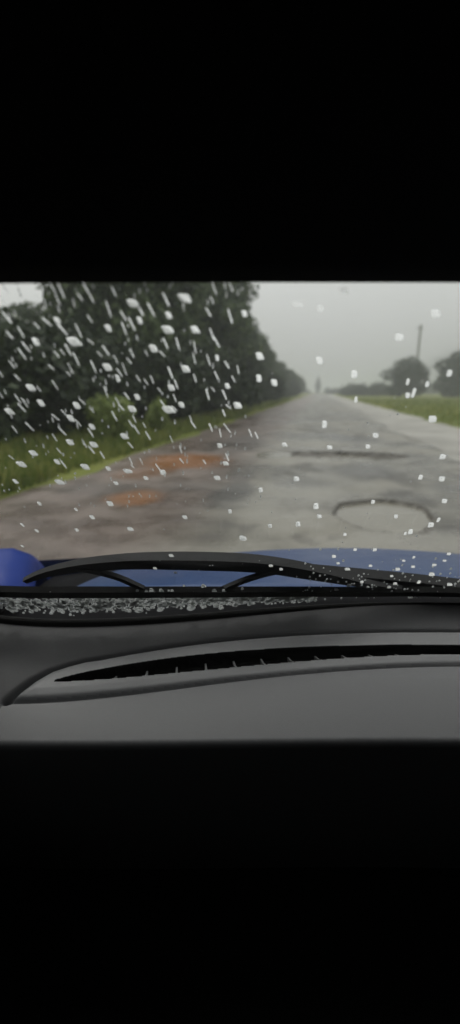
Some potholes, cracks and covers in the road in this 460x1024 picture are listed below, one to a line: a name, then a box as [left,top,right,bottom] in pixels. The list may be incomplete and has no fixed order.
pothole [331,498,437,535]
pothole [291,451,409,461]
